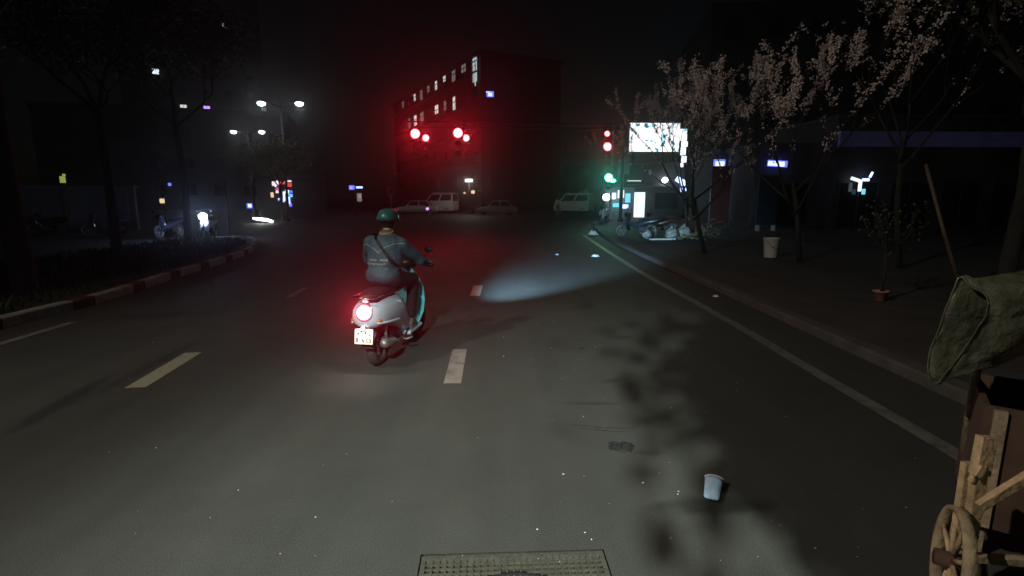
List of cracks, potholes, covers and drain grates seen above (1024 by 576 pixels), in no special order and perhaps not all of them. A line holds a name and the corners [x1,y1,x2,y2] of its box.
crack [569,424,624,432]
pothole [608,441,635,452]
